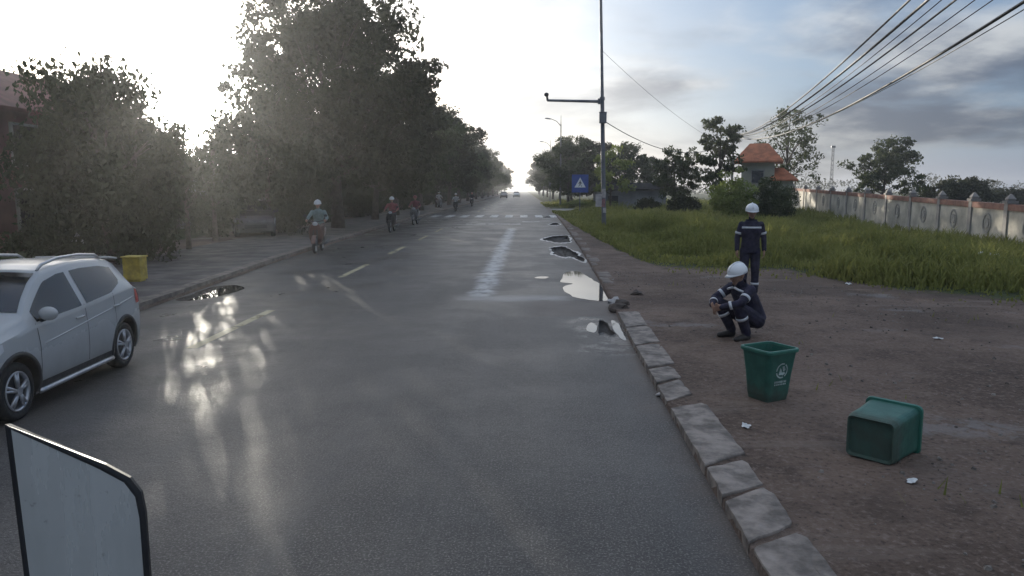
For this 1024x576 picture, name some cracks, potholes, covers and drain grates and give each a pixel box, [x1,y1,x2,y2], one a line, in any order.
pothole [540,235,572,244]
pothole [549,246,587,263]
pothole [597,319,616,336]
